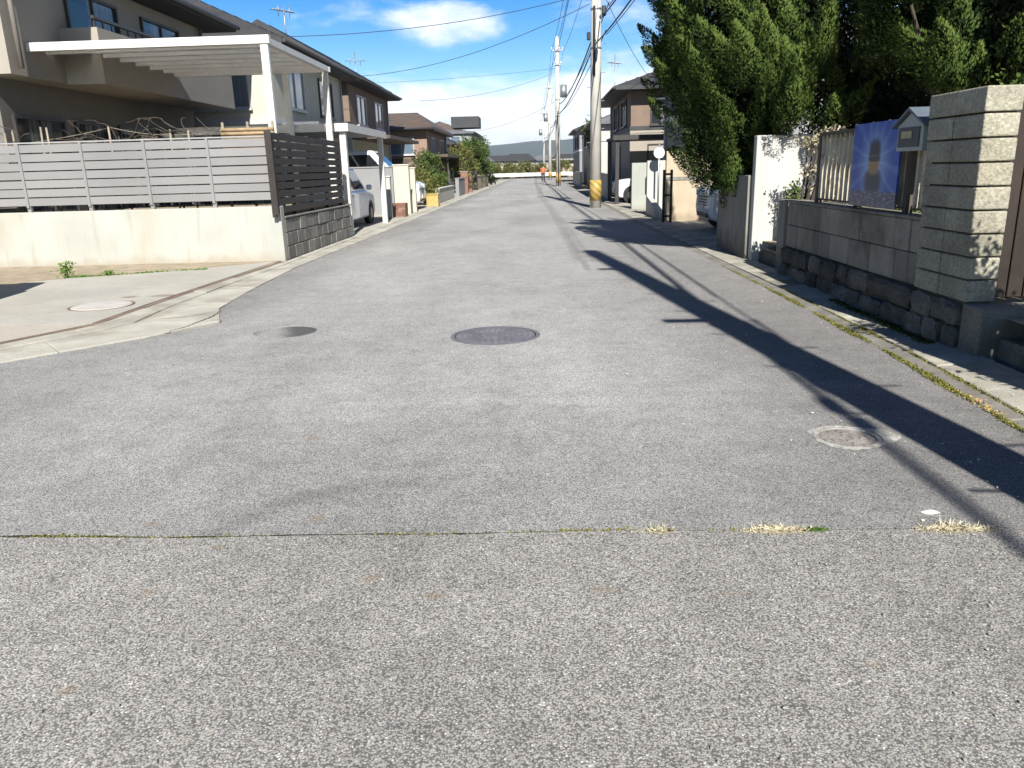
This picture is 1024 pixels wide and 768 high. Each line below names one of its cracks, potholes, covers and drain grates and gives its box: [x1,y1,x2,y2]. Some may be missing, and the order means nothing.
manhole cover [67,300,136,311]
manhole cover [451,326,540,345]
manhole cover [254,326,317,338]
utility cover [808,425,901,450]
